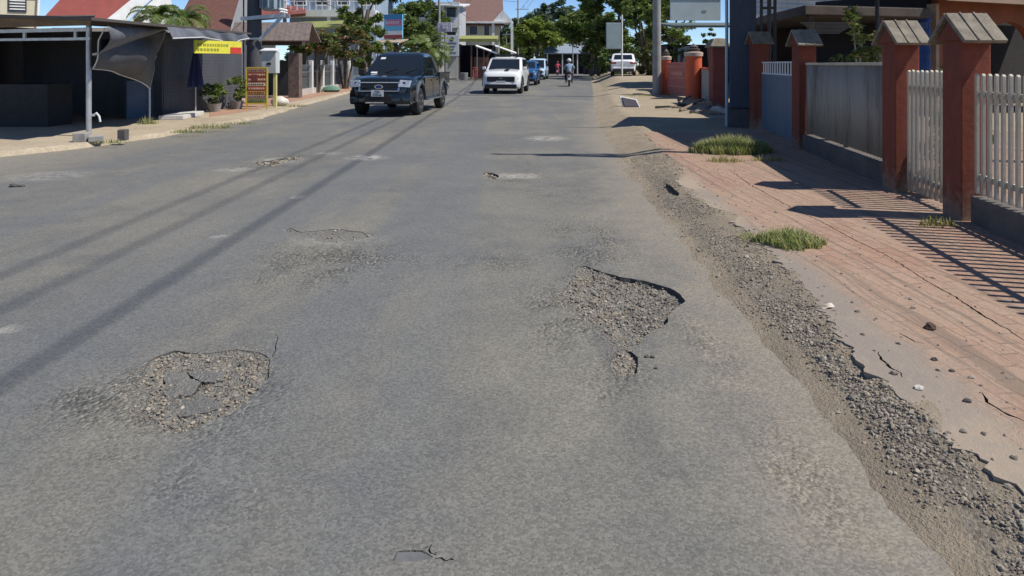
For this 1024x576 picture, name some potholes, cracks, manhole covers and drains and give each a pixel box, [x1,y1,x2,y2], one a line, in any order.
pothole [585,344,638,383]
pothole [548,264,685,352]
pothole [255,155,302,167]
pothole [107,342,292,436]
crack [425,544,454,561]
pothole [282,228,374,244]
crack [982,393,1024,421]
crack [878,333,924,378]
